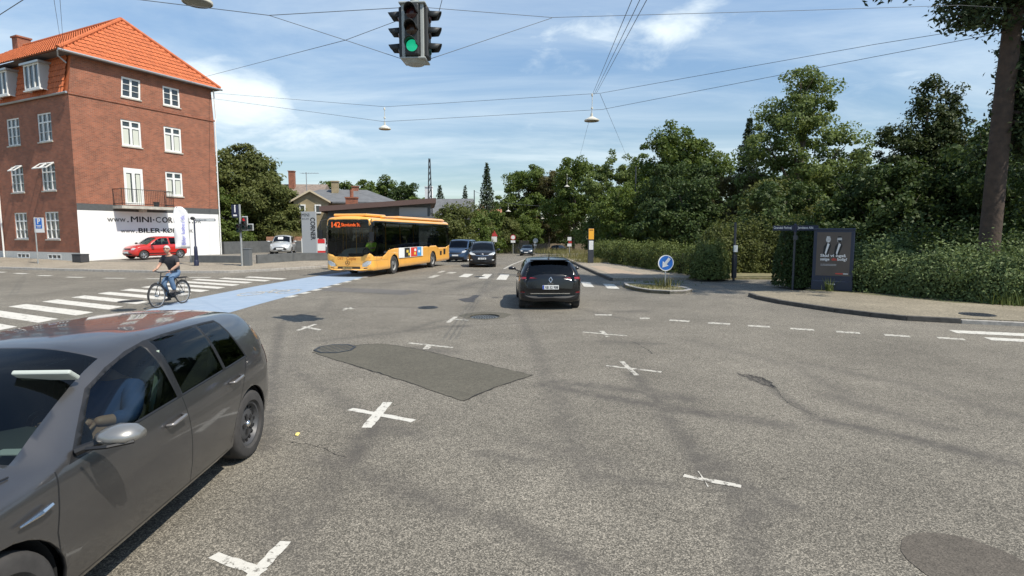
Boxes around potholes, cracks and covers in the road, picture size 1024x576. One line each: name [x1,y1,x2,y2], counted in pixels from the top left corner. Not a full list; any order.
manhole cover [313,344,356,353]
manhole cover [459,312,511,320]
